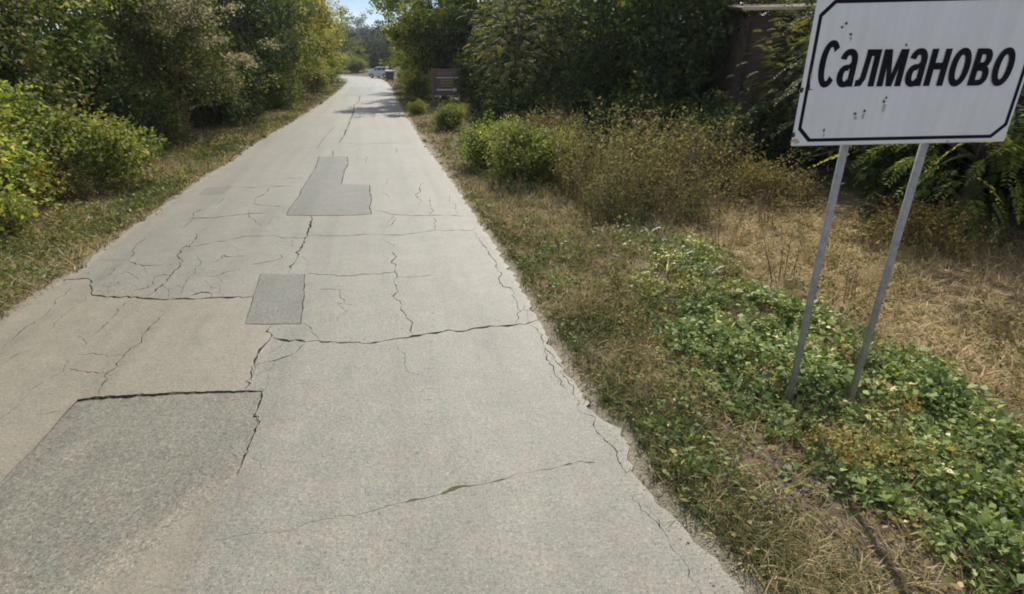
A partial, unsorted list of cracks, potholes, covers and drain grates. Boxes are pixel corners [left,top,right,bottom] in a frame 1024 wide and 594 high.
crack [637,502,702,594]
crack [1,186,630,560]
